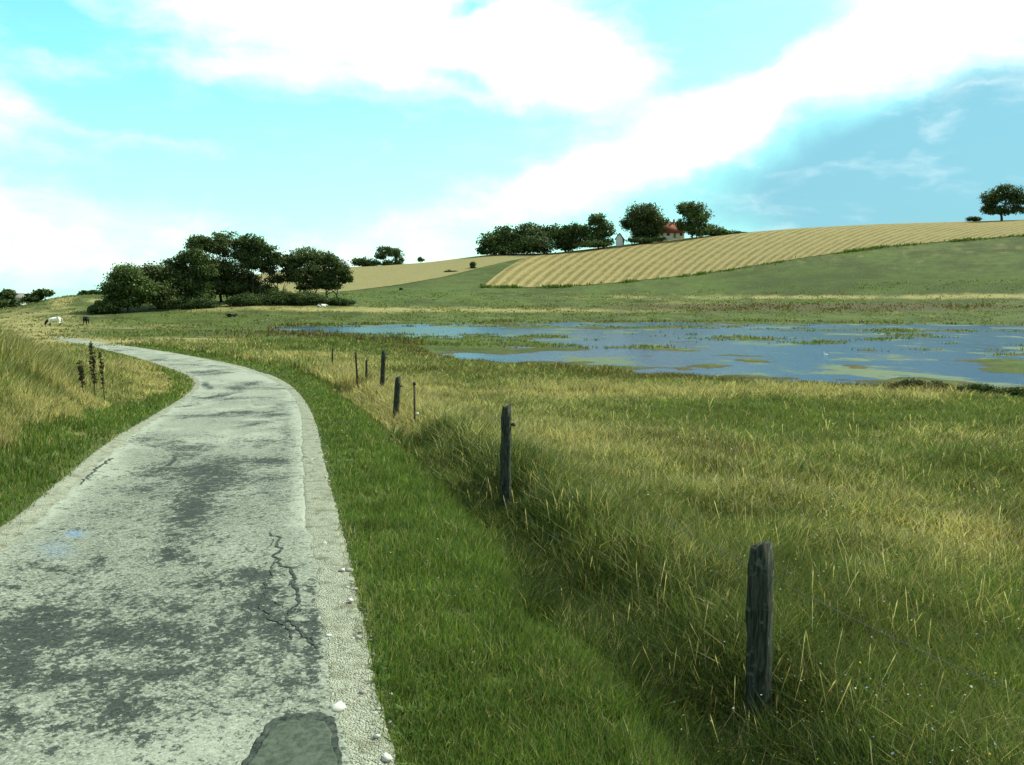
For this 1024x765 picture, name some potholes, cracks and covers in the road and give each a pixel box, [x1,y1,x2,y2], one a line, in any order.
crack [80,458,114,485]
crack [259,532,321,650]
